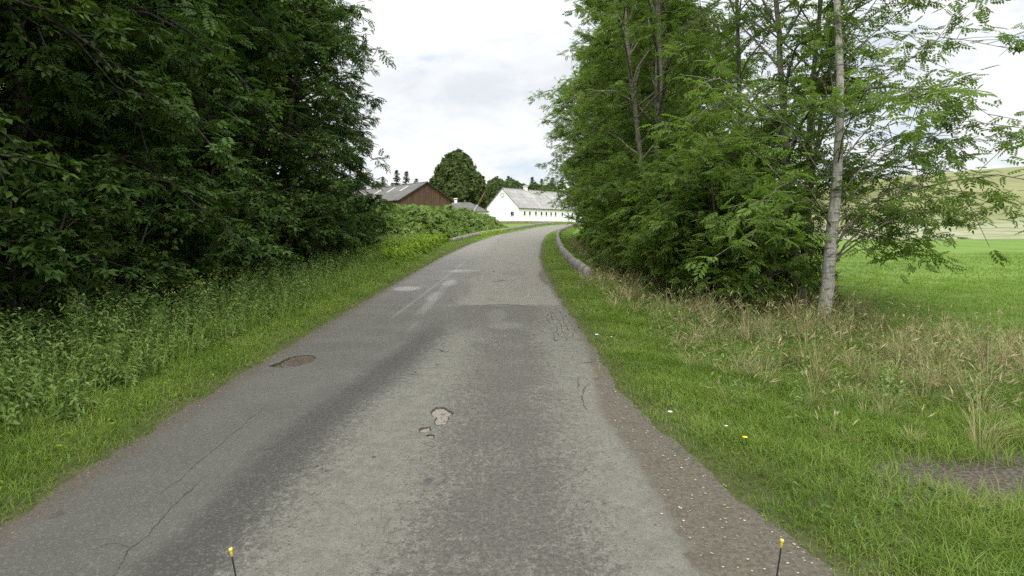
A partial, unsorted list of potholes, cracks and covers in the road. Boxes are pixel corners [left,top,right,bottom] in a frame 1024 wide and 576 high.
crack [96,418,250,576]
crack [545,308,580,341]
manhole cover [270,355,316,368]
pothole [430,407,454,426]
